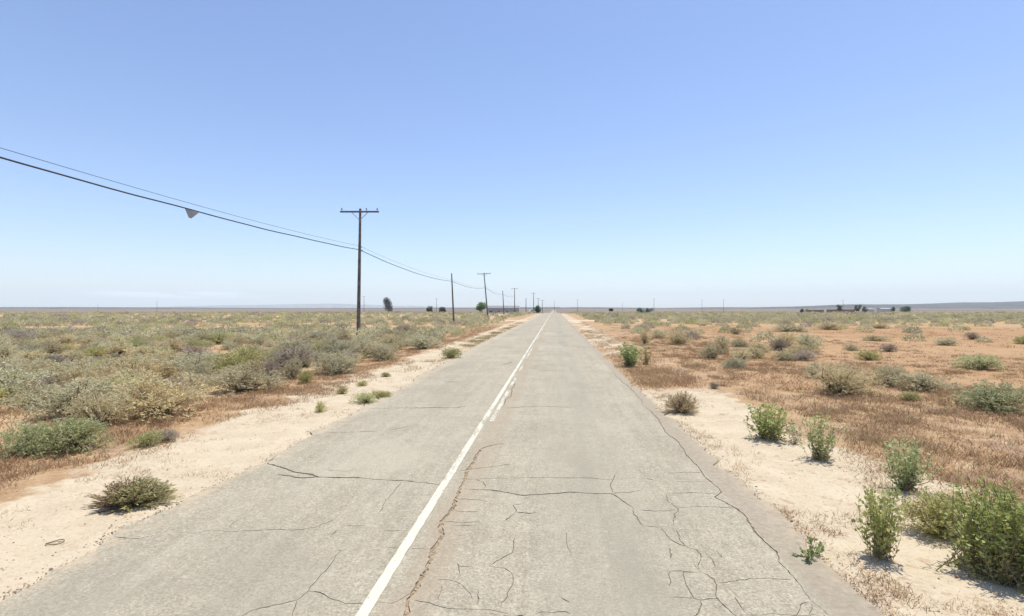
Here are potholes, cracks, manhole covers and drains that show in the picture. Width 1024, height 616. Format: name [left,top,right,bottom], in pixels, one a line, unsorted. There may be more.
crack [119,464,791,616]
